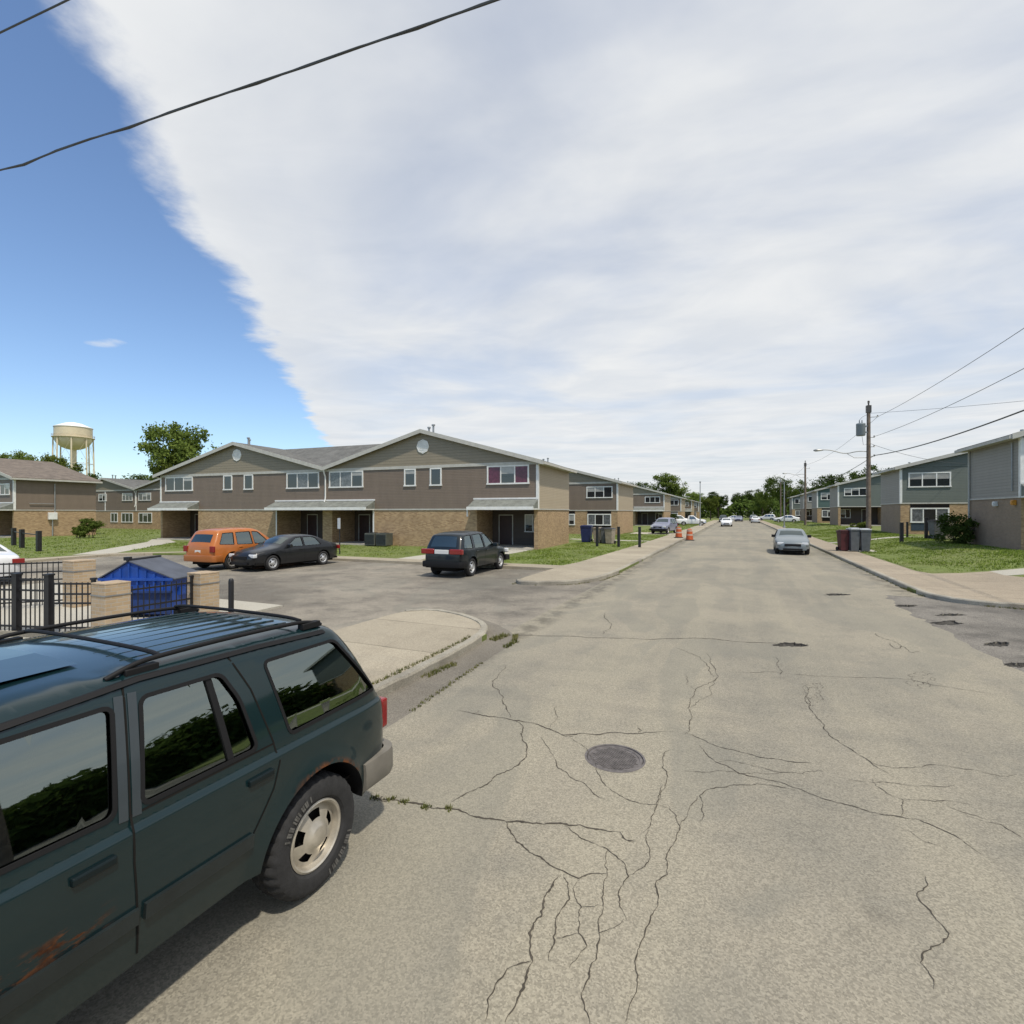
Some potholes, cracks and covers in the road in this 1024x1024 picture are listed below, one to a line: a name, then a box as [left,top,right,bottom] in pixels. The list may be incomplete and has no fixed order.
manhole cover [585,744,646,773]
crack [485,616,1023,1023]
